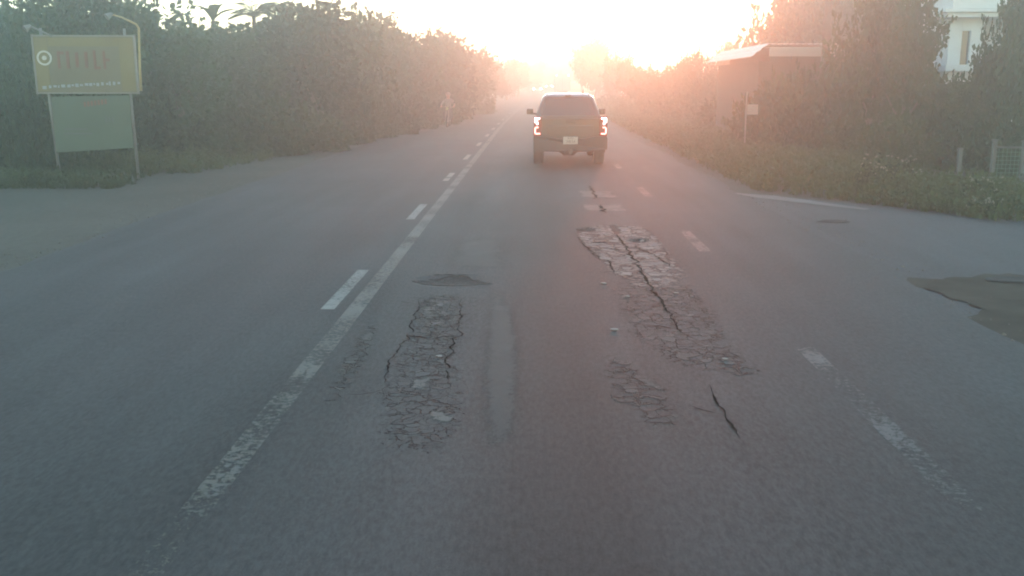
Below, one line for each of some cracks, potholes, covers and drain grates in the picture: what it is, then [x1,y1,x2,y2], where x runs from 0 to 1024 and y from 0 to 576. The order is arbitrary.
crack [323,294,474,454]
crack [574,186,760,438]
